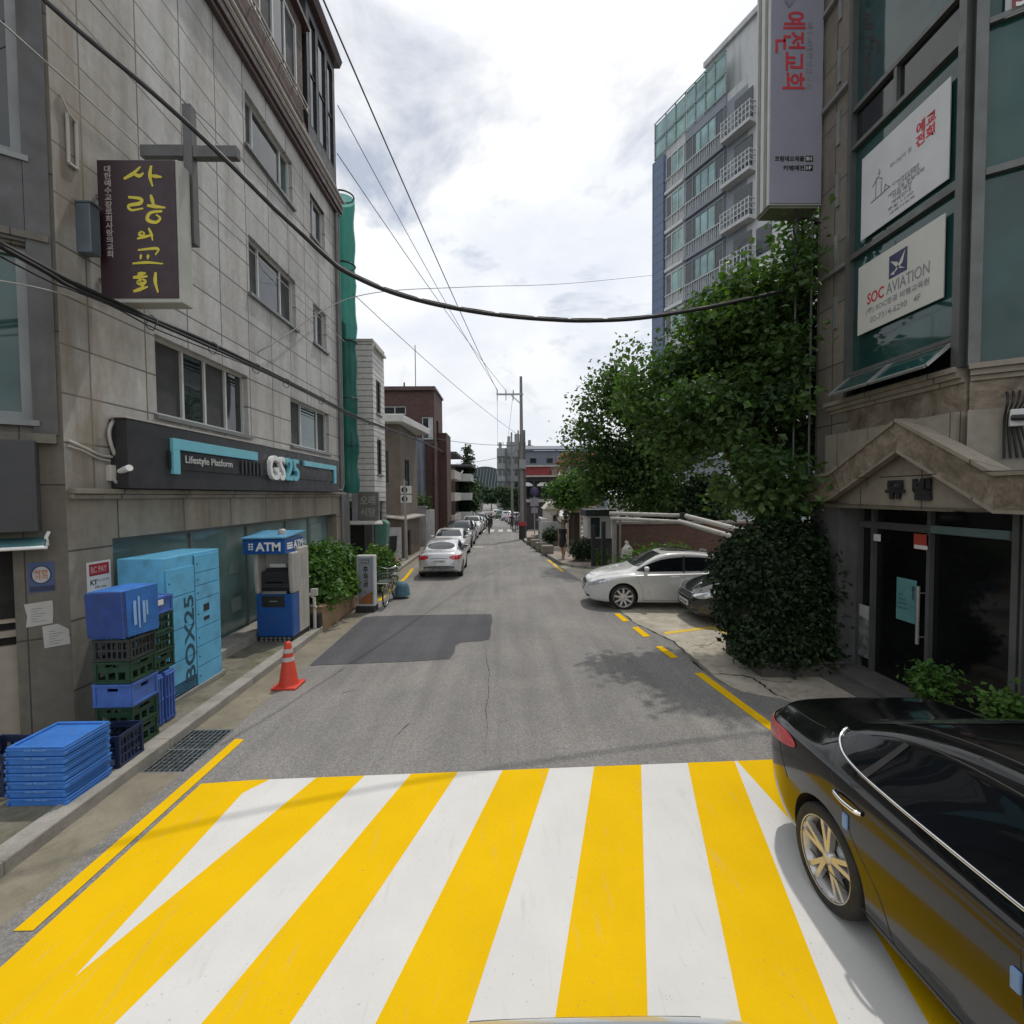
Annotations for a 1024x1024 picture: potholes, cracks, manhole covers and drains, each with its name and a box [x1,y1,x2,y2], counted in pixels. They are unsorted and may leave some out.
drain grate [139,729,234,773]
crack [714,673,799,699]
